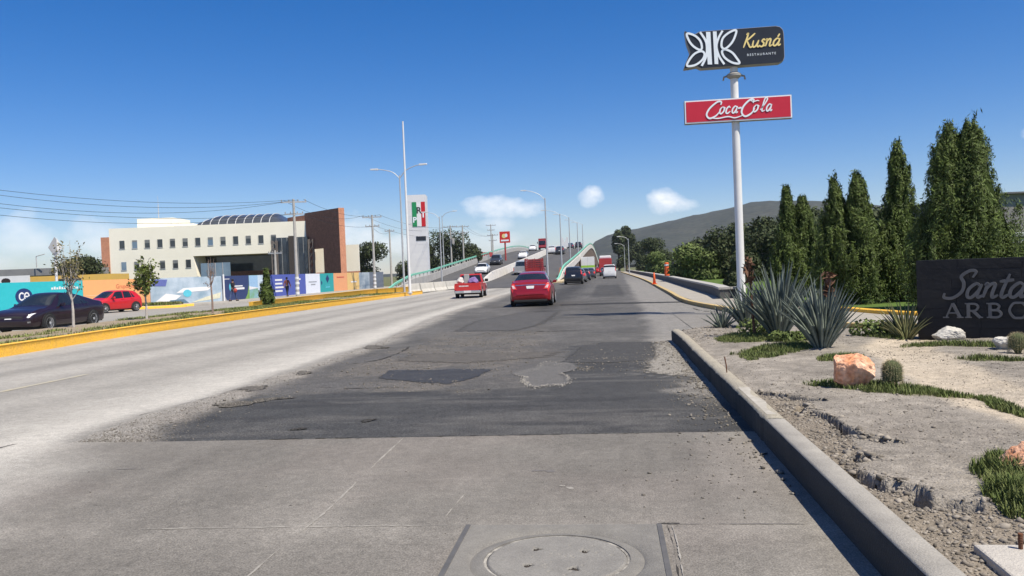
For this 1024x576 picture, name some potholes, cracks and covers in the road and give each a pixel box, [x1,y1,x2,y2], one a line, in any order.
pothole [512,361,577,390]
manhole cover [438,523,673,576]
pothole [211,400,270,408]
